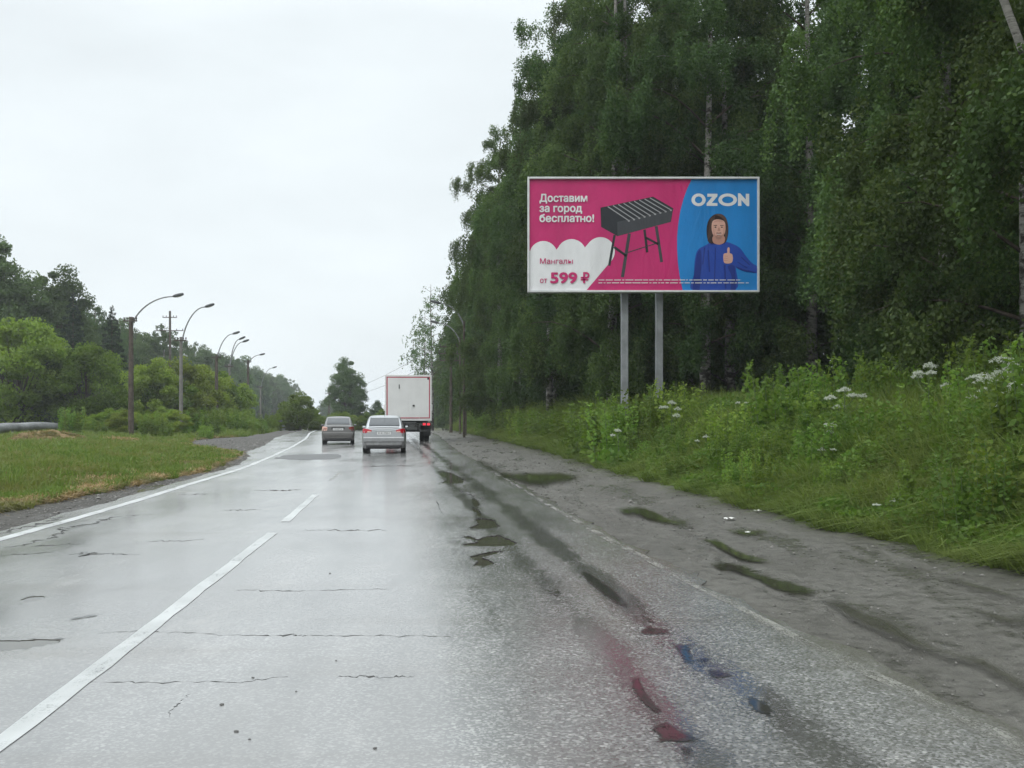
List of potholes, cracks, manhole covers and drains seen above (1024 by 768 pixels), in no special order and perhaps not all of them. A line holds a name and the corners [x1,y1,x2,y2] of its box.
crack [109,675,405,717]
pothole [470,551,503,567]
crack [0,514,150,557]
pothole [467,517,499,530]
pothole [460,535,517,547]
pothole [438,471,465,484]
